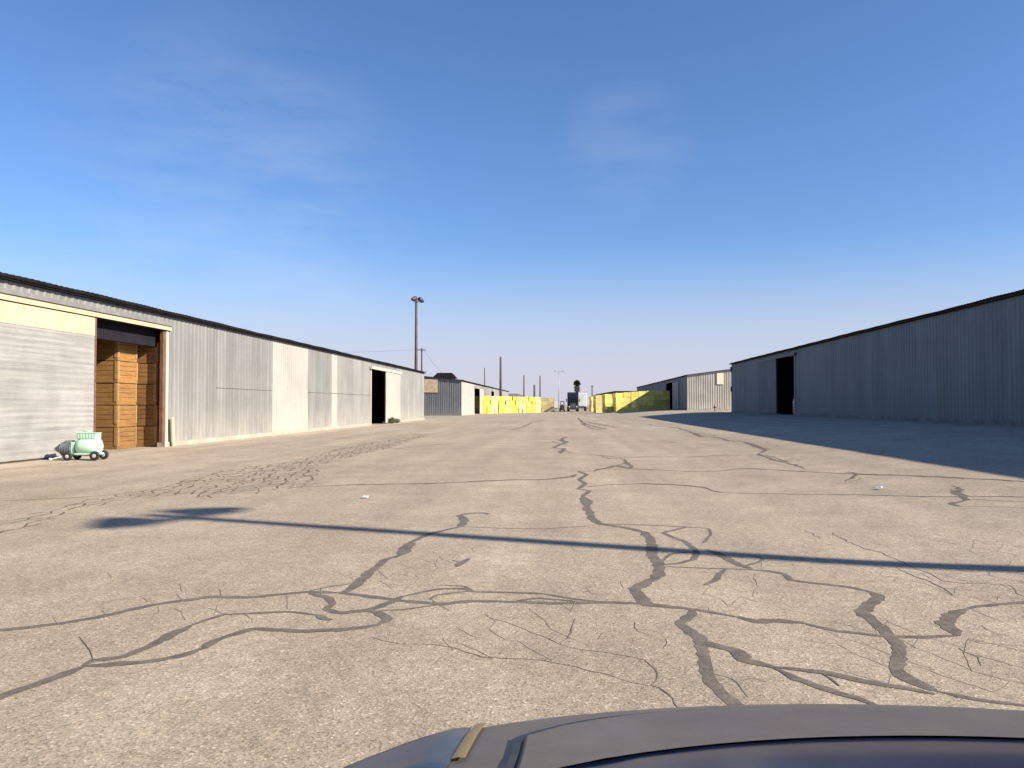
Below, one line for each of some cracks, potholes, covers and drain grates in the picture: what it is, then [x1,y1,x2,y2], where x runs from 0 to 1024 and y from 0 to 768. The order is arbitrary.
crack [0,418,1024,533]
crack [53,573,236,626]
crack [679,531,1024,694]
crack [209,544,678,707]
